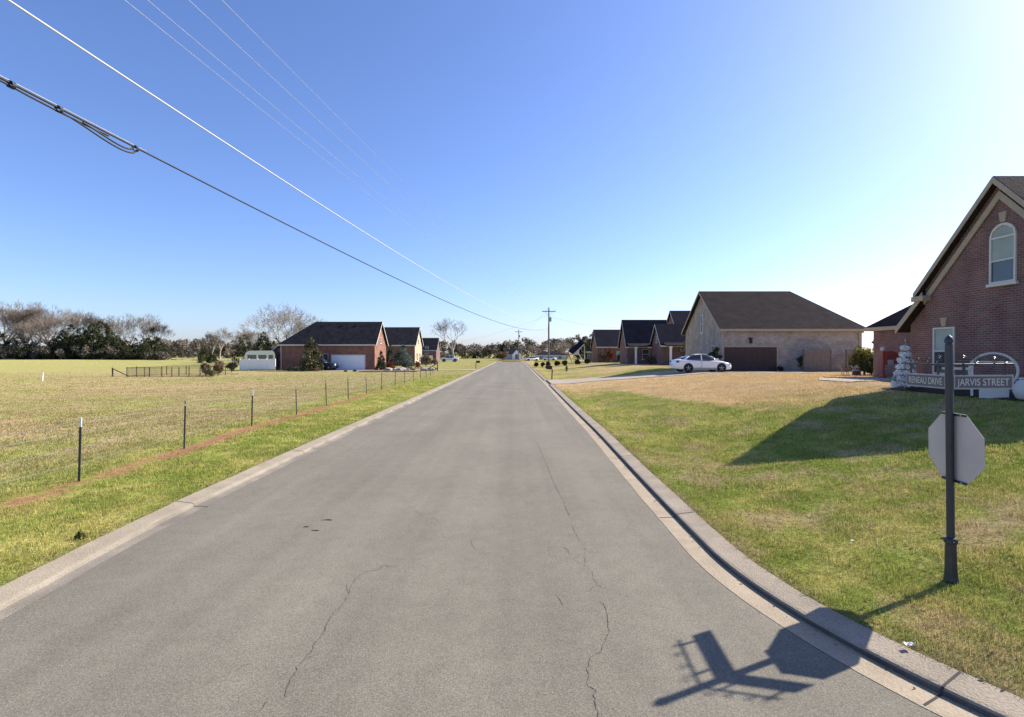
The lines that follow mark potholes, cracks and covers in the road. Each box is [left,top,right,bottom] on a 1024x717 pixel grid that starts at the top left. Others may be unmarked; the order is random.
crack [548,530,612,717]
crack [284,565,386,701]
